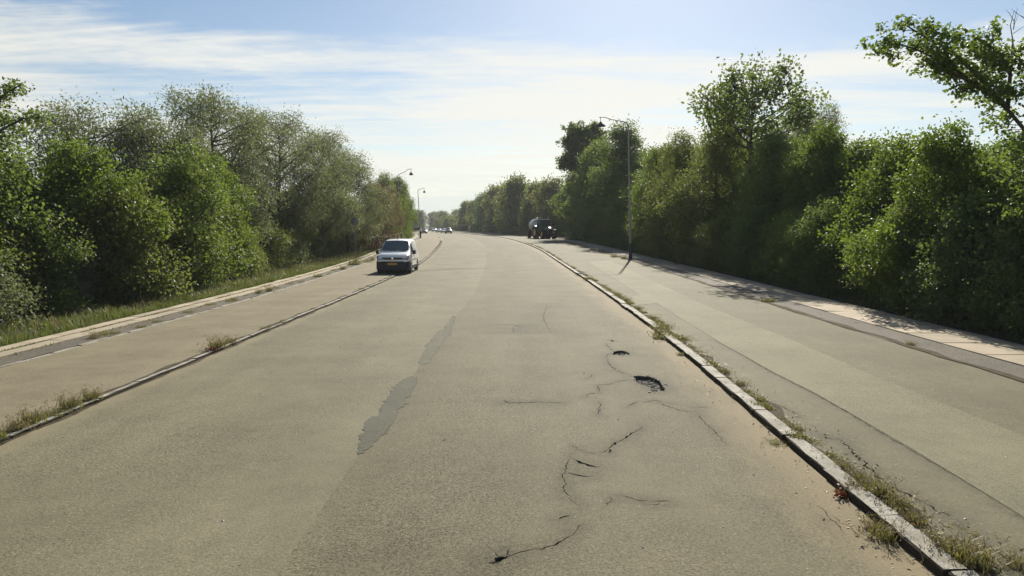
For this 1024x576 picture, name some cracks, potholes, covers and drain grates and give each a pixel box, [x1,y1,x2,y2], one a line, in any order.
crack [489,515,580,564]
pothole [634,375,668,393]
crack [562,427,675,505]
